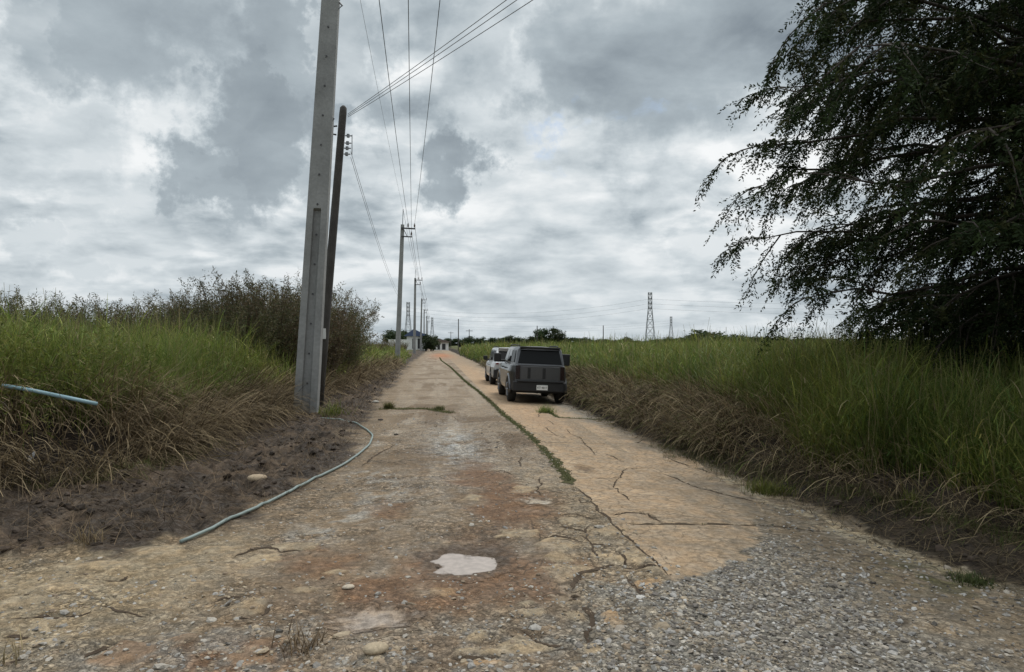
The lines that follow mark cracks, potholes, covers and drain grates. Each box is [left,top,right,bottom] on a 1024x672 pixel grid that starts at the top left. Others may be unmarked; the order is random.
crack [661,456,754,502]
crack [236,546,300,556]
crack [487,414,669,643]
